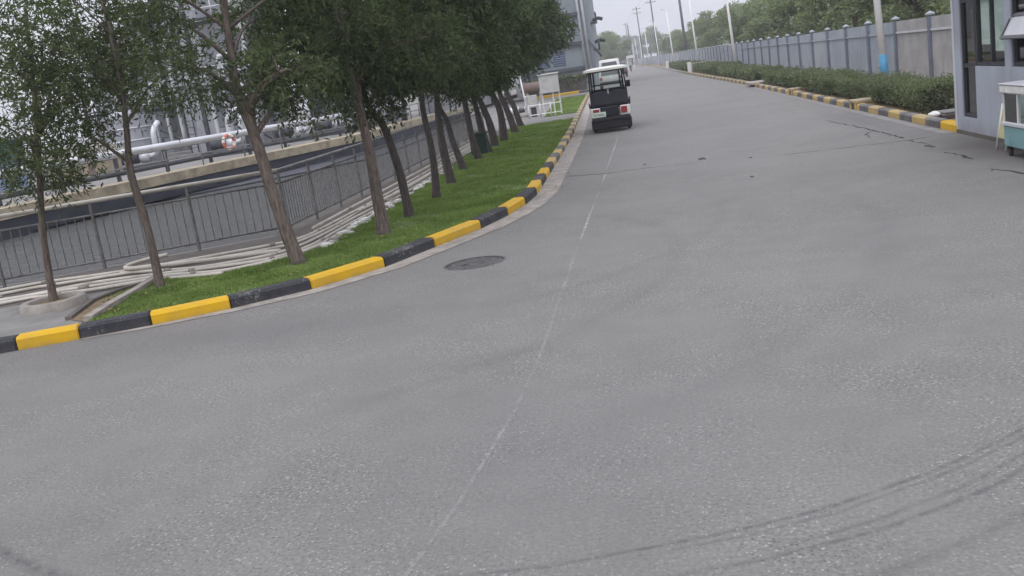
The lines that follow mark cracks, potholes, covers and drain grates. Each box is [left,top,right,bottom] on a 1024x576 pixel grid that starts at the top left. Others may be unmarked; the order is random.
manhole cover [443,255,506,271]
crack [831,121,903,138]
